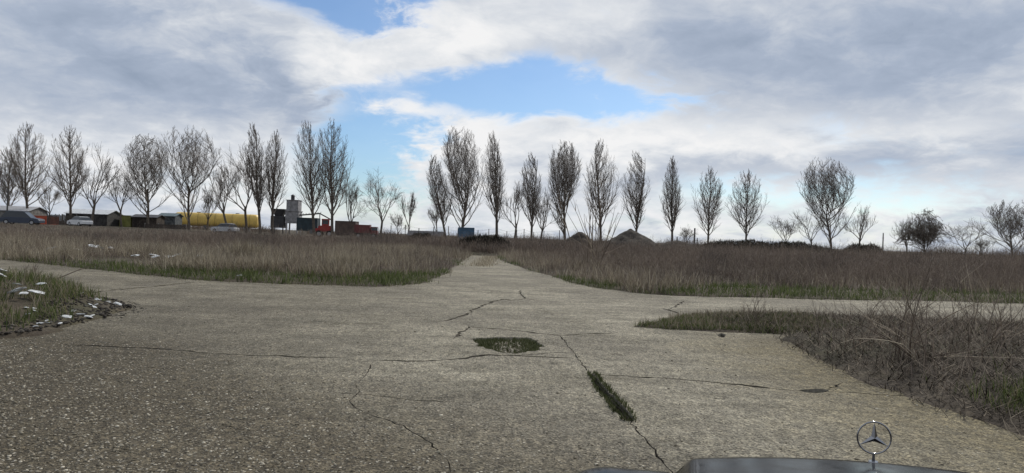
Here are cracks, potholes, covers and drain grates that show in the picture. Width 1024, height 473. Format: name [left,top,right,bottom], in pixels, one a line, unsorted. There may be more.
pothole [470,337,545,352]
crack [328,291,796,473]
